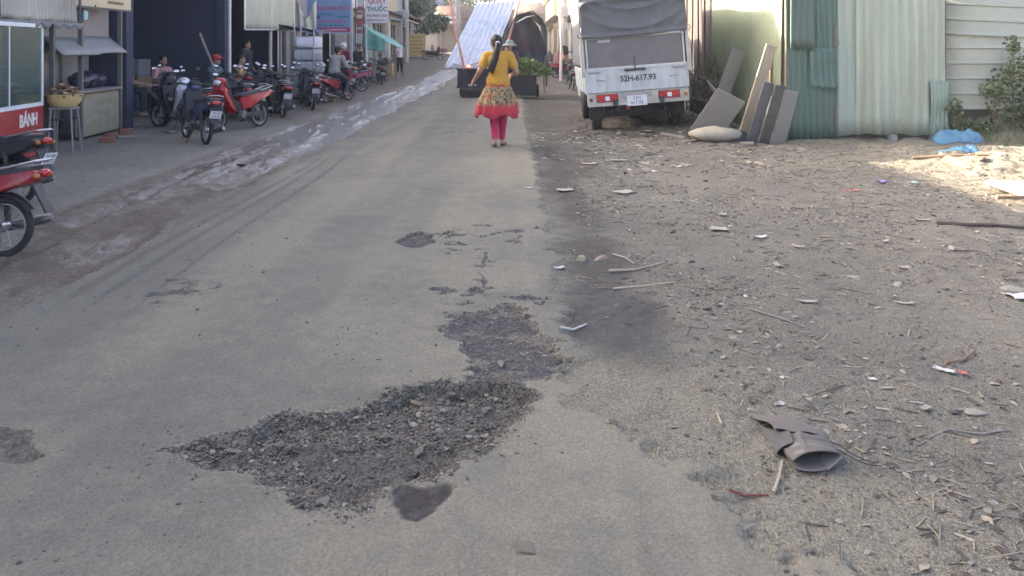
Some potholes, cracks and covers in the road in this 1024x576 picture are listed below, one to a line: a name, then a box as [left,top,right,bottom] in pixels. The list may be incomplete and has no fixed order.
pothole [0,427,47,465]
pothole [159,379,543,513]
crack [429,224,552,306]
pothole [435,303,573,383]
pothole [395,231,436,248]
